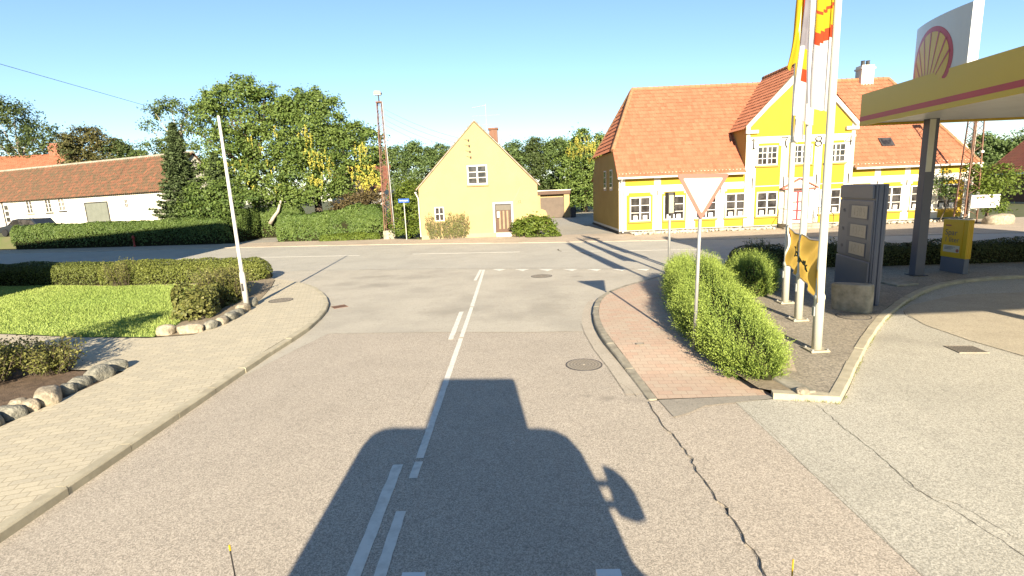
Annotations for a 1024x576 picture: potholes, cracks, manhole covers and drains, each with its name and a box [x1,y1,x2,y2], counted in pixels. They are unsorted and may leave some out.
crack [581,324,767,576]
manhole cover [566,359,602,371]
crack [817,405,1024,556]
